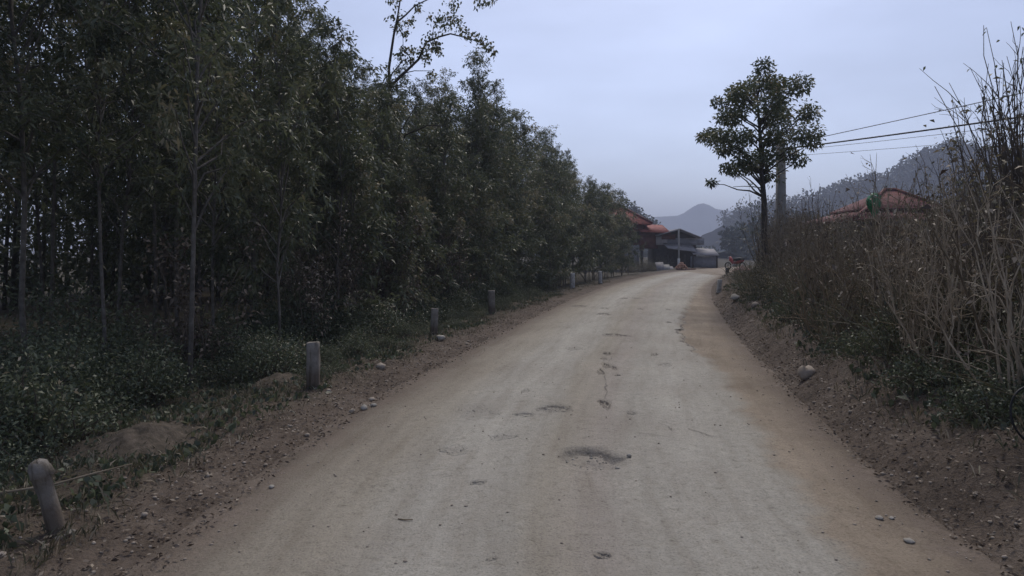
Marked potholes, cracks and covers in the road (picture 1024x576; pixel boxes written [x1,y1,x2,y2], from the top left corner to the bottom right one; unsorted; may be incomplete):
pothole [439,446,468,456]
pothole [556,448,632,472]
